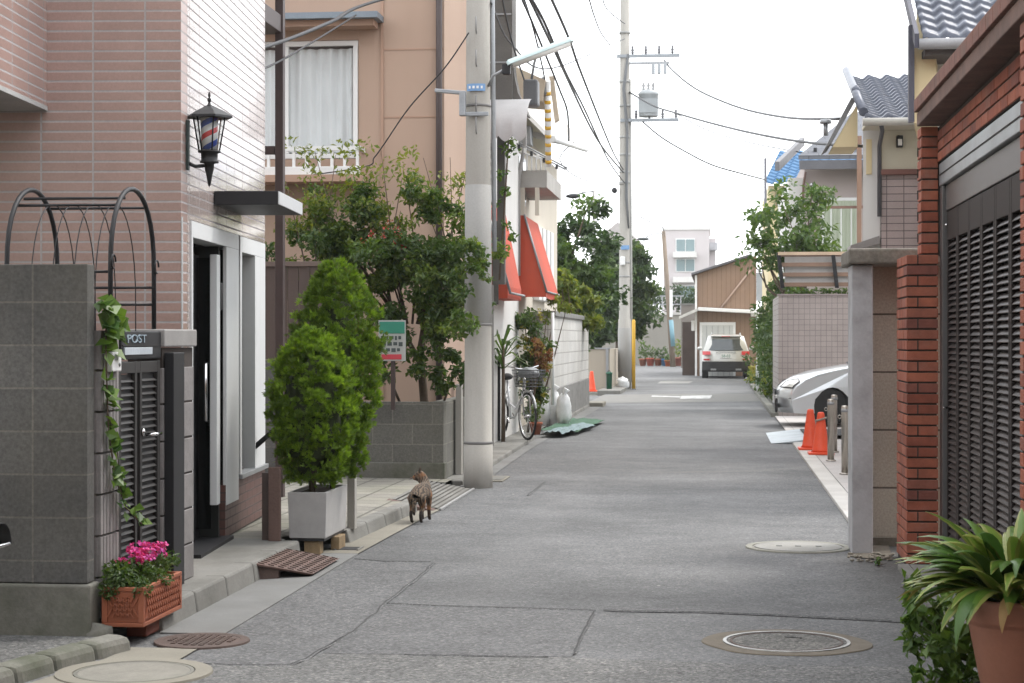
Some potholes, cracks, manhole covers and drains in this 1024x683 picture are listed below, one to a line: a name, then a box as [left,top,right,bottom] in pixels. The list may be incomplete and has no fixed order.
manhole cover [701,629,873,656]
manhole cover [745,541,850,554]
manhole cover [54,658,213,683]
